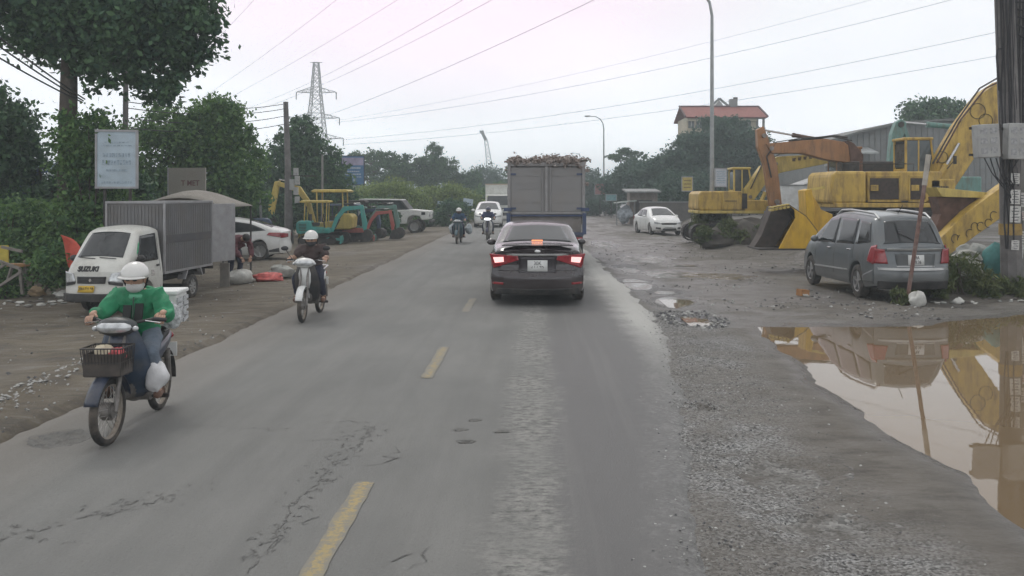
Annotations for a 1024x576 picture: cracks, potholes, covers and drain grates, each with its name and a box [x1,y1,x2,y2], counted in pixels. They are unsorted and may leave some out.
crack [390,544,433,565]
crack [241,420,388,575]
